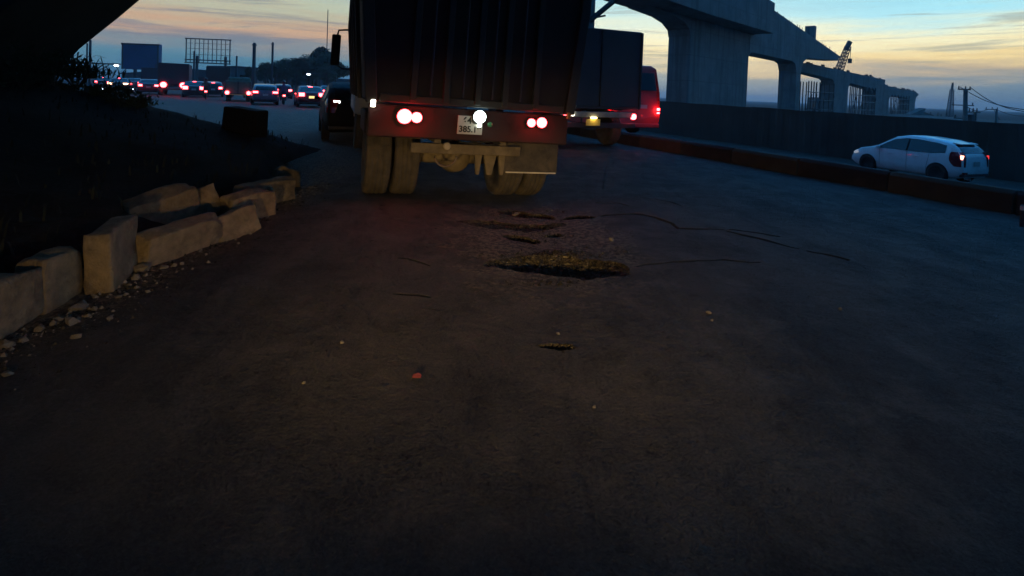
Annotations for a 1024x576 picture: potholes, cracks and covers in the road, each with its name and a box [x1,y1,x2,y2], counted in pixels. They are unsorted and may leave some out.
pothole [498,210,556,220]
crack [595,199,849,267]
pothole [503,235,541,244]
crack [393,293,441,311]
pothole [455,220,566,233]
pothole [482,255,631,281]
